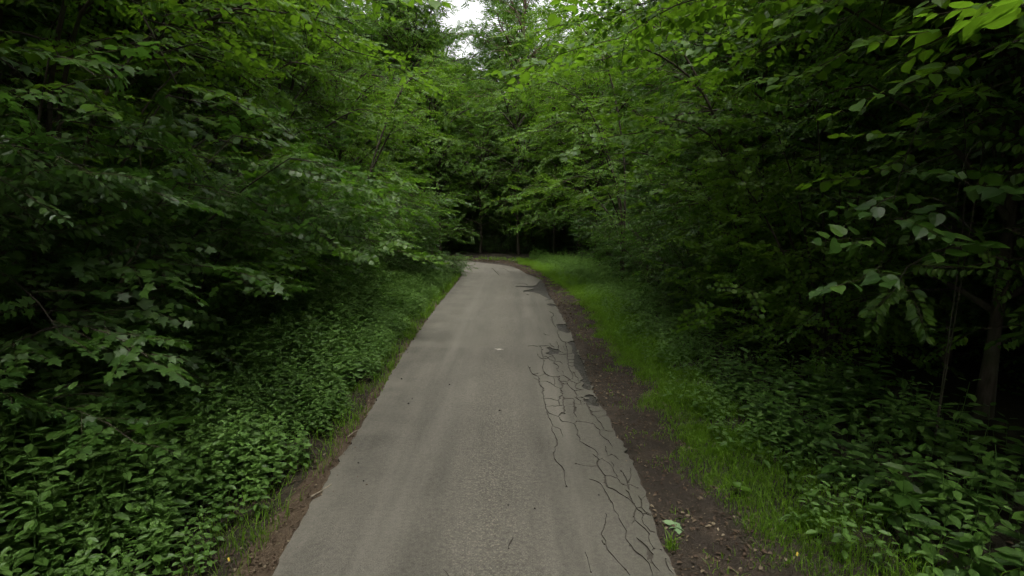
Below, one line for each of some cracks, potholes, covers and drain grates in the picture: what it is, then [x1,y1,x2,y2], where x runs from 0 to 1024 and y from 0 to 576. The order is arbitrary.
crack [529,311,674,576]
